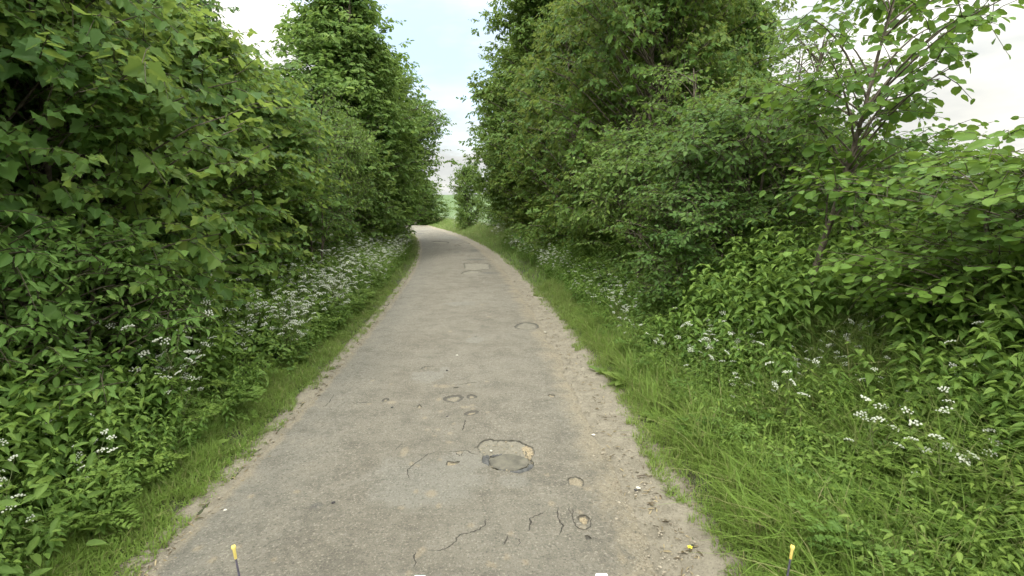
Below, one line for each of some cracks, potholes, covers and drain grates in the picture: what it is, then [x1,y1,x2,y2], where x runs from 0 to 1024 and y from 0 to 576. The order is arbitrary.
pothole [443,395,464,403]
pothole [476,438,535,473]
crack [396,443,480,479]
crack [413,507,592,566]
pothole [514,322,539,330]
pothole [567,476,584,487]
